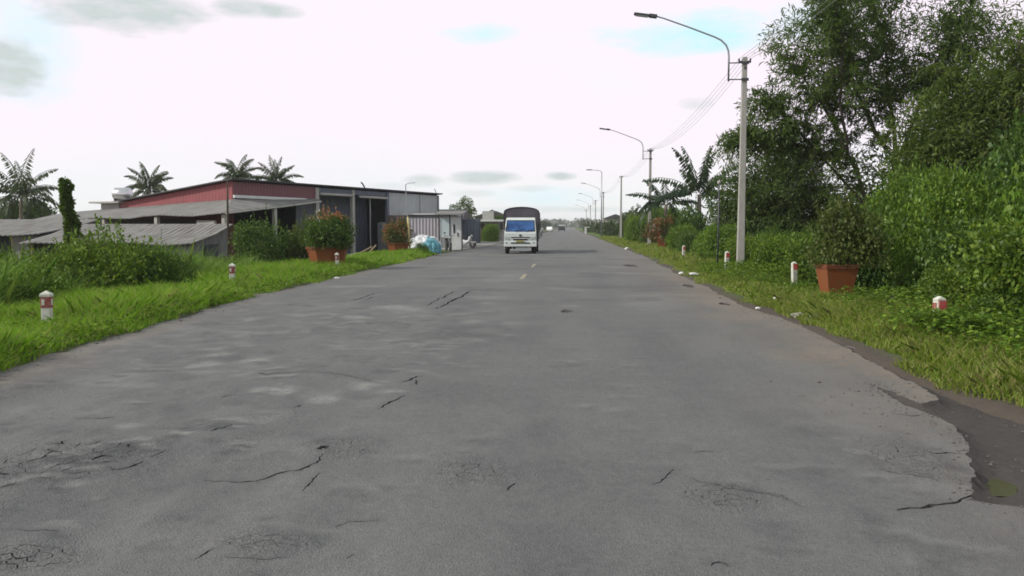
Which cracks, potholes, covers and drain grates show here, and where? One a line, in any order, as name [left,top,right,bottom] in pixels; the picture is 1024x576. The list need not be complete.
crack [205,442,365,491]
crack [196,533,298,560]
crack [0,529,73,569]
crack [652,470,802,507]
crack [439,463,515,490]
crack [260,371,418,409]
crack [429,291,470,309]
crack [872,444,971,510]
crack [0,441,164,488]
